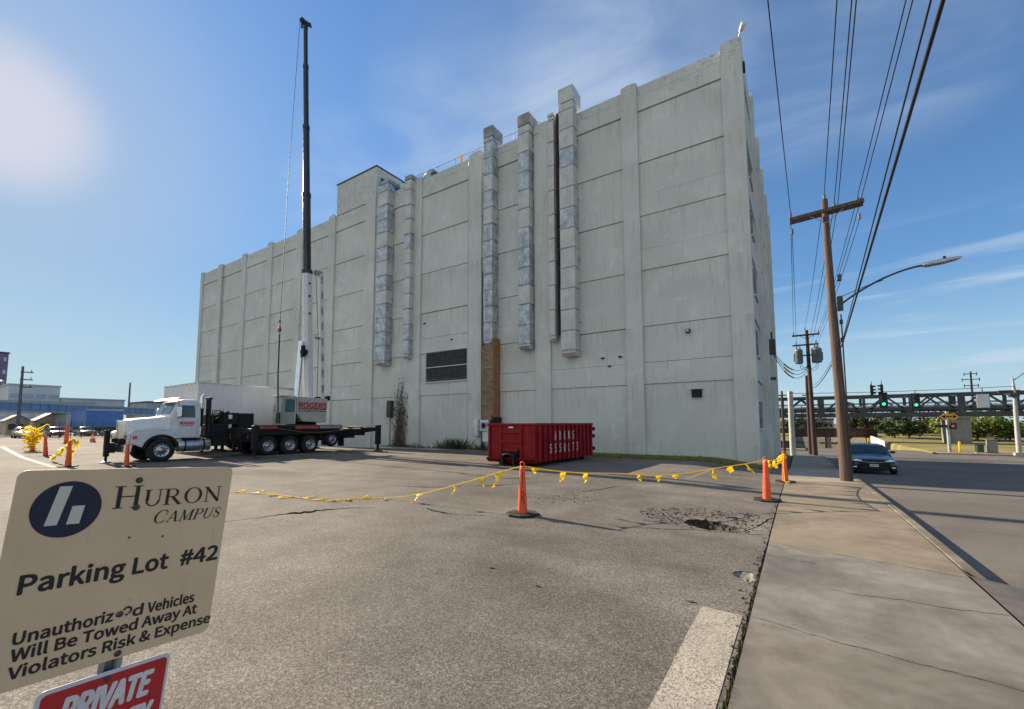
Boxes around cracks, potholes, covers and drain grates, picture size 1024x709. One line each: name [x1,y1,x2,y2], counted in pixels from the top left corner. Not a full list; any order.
crack [639,508,774,535]
crack [225,507,374,522]
pothole [683,519,740,532]
crack [833,589,1010,616]
